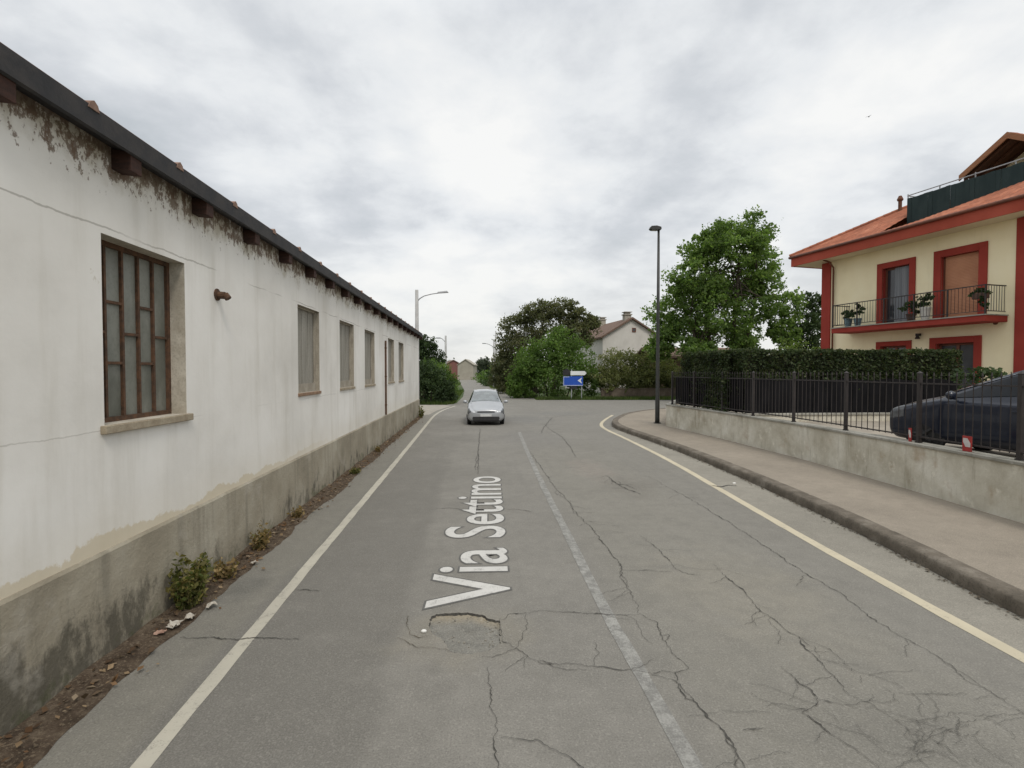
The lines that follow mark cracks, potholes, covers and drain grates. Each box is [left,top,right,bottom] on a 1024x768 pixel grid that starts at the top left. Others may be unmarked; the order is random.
pothole [428,612,501,654]
crack [482,452,1024,768]
